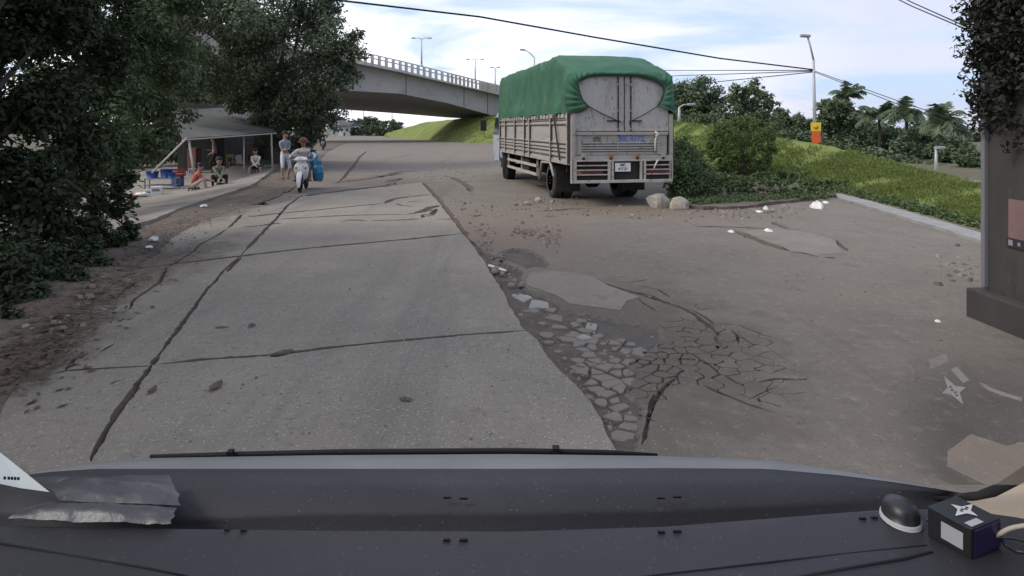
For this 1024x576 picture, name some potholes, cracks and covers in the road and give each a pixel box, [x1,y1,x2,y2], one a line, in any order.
crack [108,152,475,314]
pothole [470,242,664,451]
crack [605,279,807,445]
